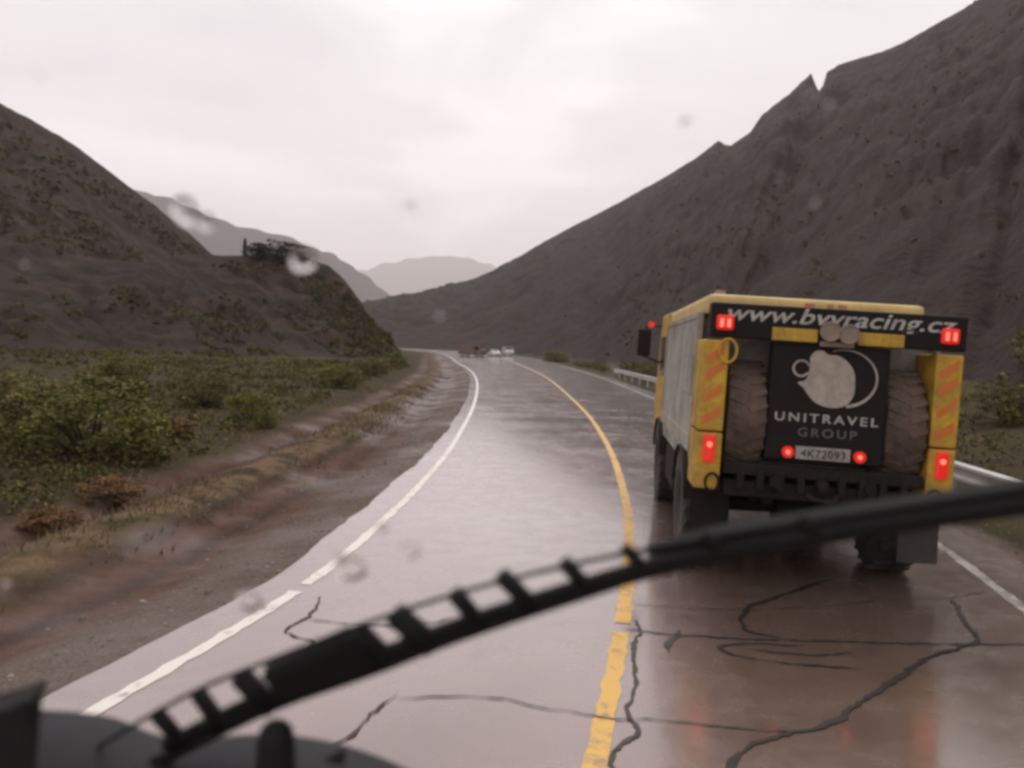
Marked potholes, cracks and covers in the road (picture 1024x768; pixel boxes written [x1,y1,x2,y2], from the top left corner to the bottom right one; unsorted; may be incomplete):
crack [335,579,1023,768]
crack [284,597,454,641]
